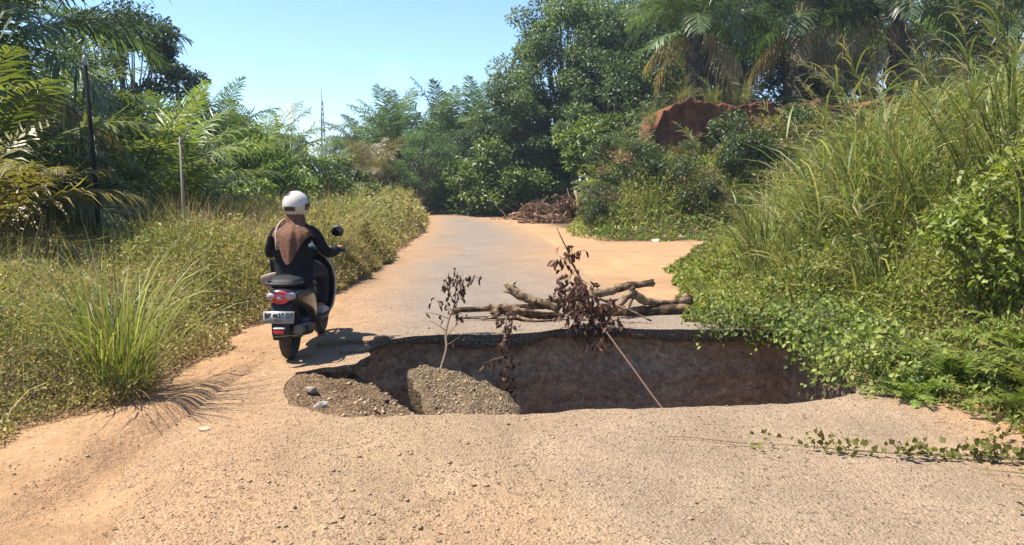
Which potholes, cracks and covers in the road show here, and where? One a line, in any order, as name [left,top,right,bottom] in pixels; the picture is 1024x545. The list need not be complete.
pothole [283,328,856,418]
